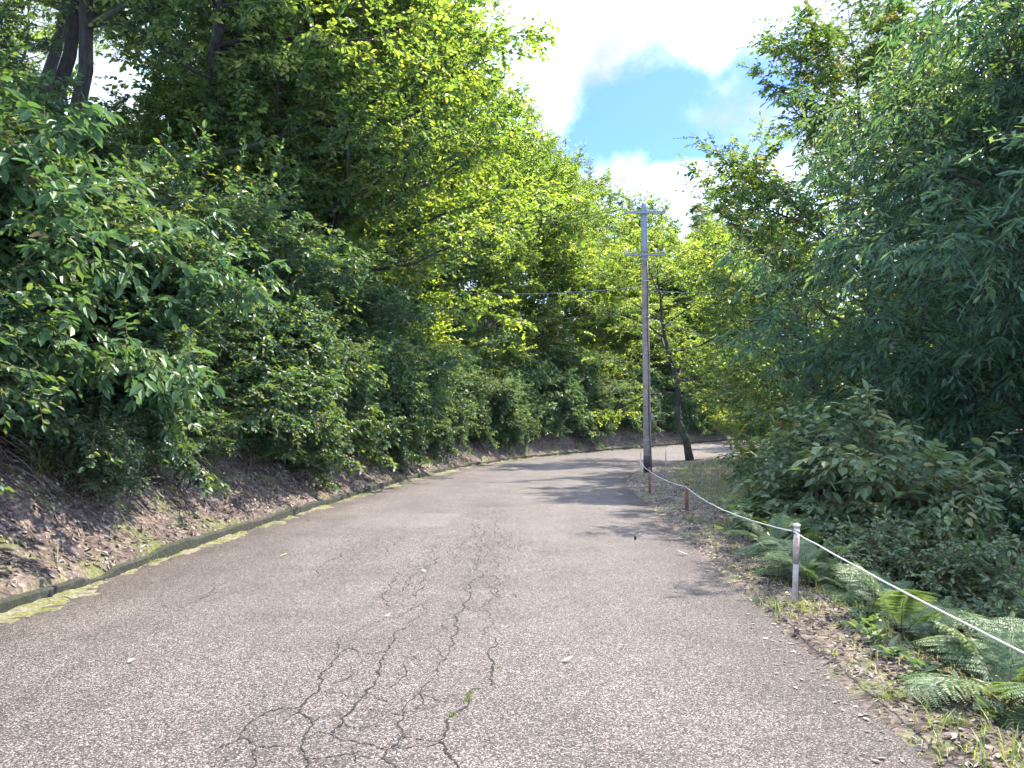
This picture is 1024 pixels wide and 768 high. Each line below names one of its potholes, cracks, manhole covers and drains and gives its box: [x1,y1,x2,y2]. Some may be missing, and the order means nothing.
crack [216,512,522,768]
